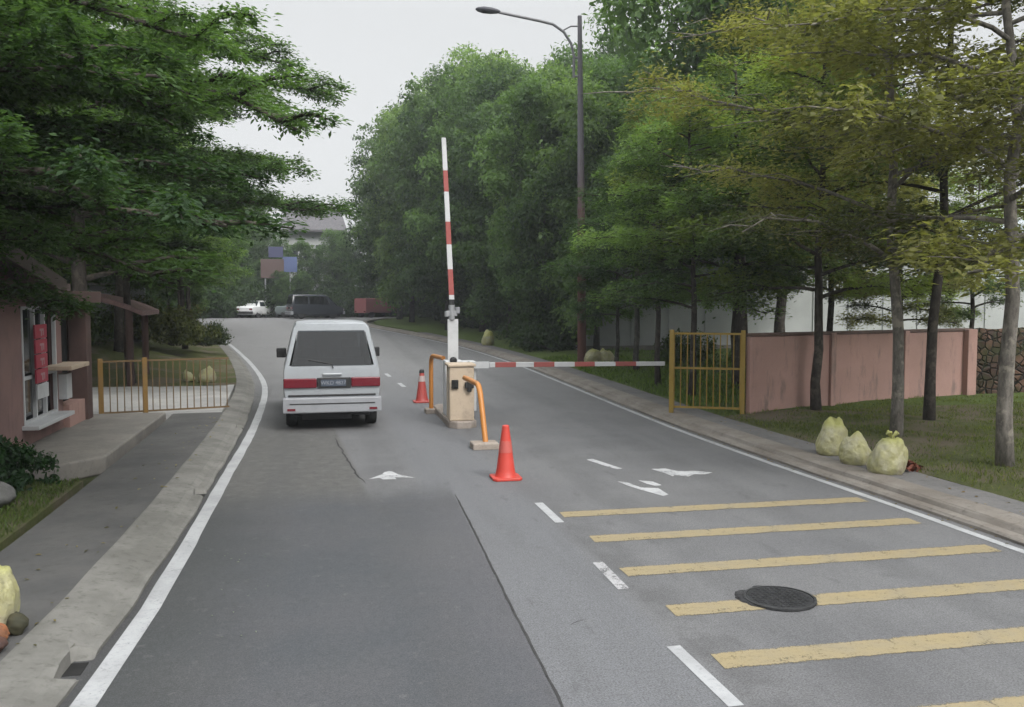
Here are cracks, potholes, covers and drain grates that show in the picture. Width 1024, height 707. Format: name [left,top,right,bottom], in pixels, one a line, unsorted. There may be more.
drain grate [62,662,89,677]
manhole cover [734,585,817,612]
